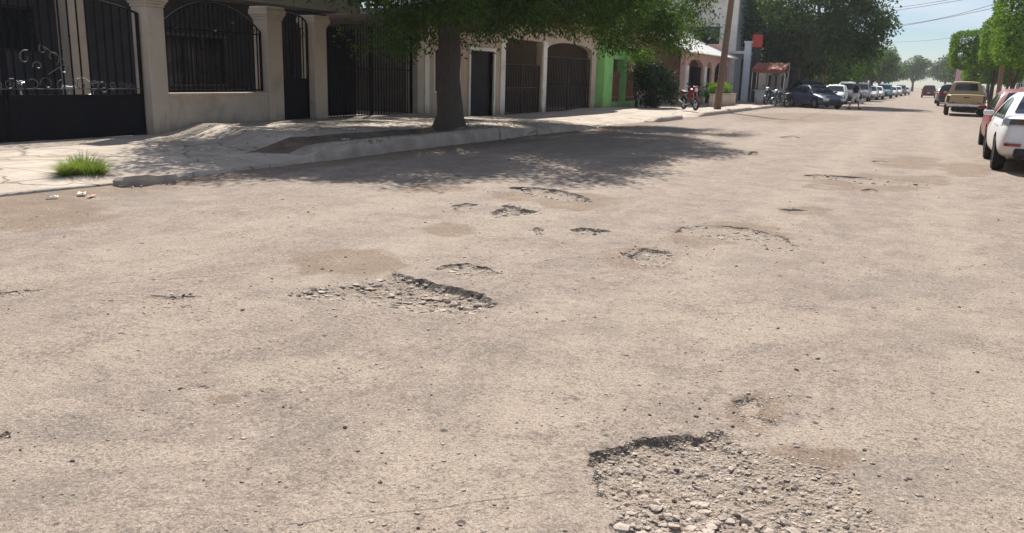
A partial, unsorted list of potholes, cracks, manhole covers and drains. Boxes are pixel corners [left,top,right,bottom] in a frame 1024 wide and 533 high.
pothole [620,248,676,268]
pothole [490,205,538,218]
pothole [452,203,478,211]
pothole [570,227,612,236]
pothole [587,431,898,533]
pothole [278,271,498,316]
pothole [508,187,593,202]
pothole [434,263,499,277]
pothole [805,174,937,187]
pothole [673,224,806,254]
pothole [731,397,780,427]
